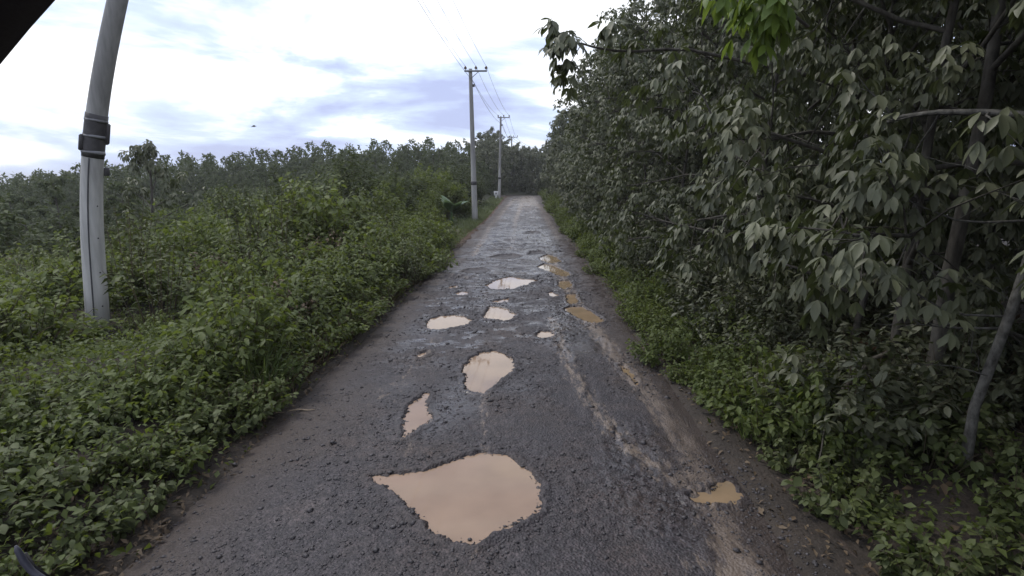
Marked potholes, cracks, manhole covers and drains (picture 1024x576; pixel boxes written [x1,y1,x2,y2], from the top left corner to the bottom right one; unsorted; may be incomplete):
pothole [554,279,576,290]
pothole [453,348,522,397]
pothole [420,313,477,331]
pothole [482,275,544,290]
pothole [478,304,521,322]
pothole [394,389,442,441]
pothole [530,329,561,340]
pothole [558,305,609,324]
pothole [676,475,752,511]
pothole [535,263,575,277]
pothole [536,253,566,264]
pothole [359,446,552,552]
